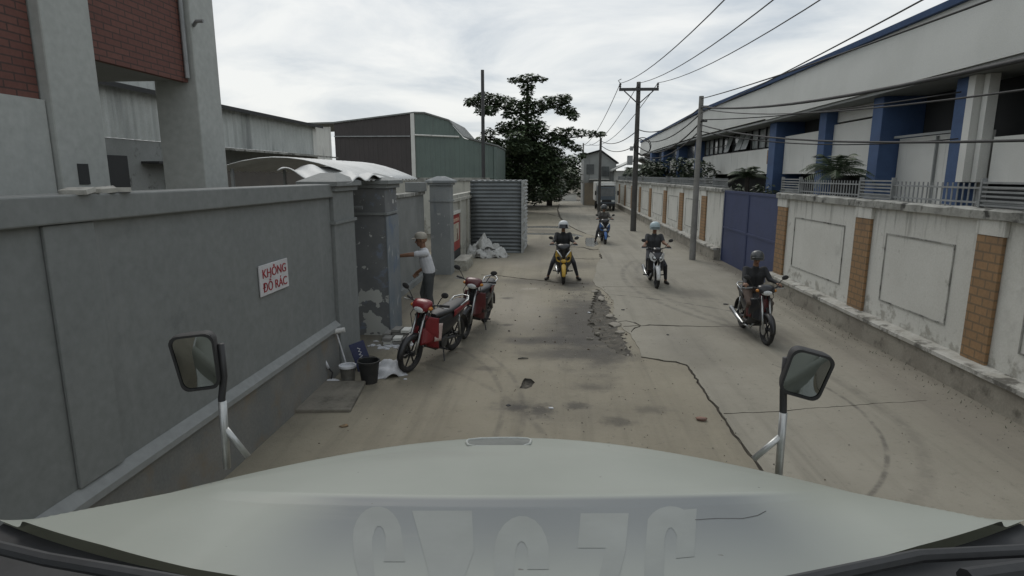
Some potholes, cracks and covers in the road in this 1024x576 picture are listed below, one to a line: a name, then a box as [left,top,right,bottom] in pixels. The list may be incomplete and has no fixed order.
crack [619,321,740,332]
pothole [520,378,535,389]
